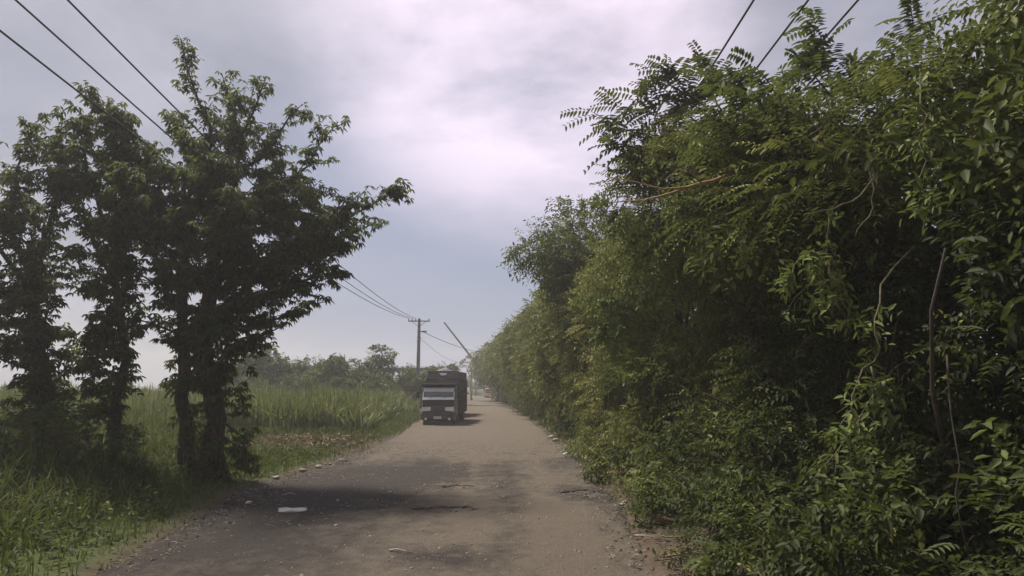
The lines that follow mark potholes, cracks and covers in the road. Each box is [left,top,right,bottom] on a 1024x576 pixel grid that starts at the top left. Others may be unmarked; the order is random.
pothole [402,505,488,516]
pothole [555,489,614,499]
